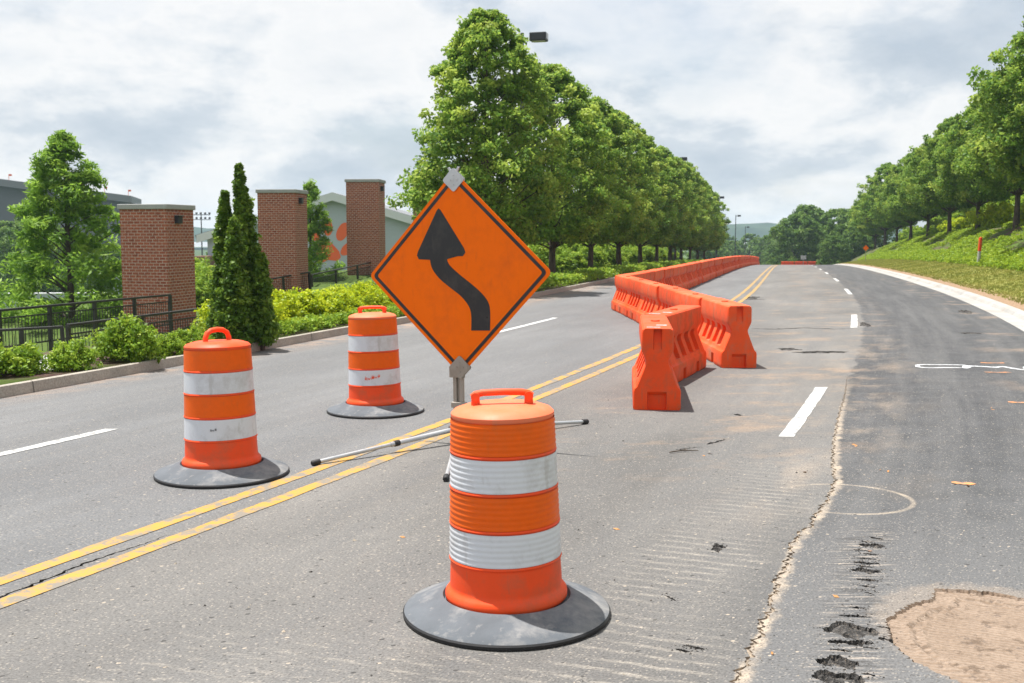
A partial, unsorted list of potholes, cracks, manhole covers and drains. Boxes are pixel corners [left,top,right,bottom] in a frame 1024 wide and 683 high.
pothole [847,535,889,596]
pothole [813,604,898,653]
crack [729,383,849,683]
crack [0,535,166,598]
pothole [811,646,885,683]
